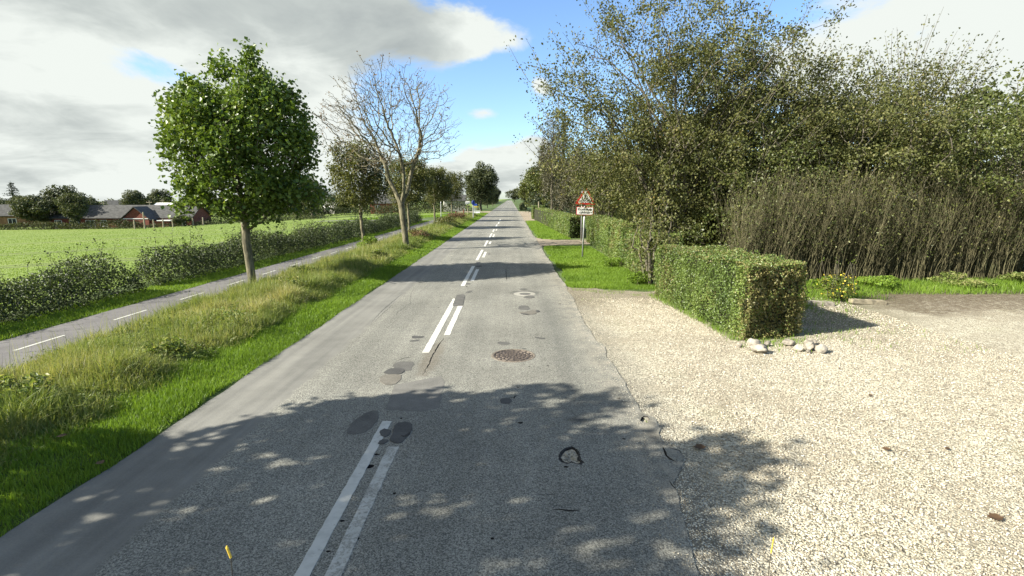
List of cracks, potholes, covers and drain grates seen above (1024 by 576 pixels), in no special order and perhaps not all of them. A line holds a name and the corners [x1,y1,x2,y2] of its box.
manhole cover [491,349,536,362]
pothole [558,446,584,465]
